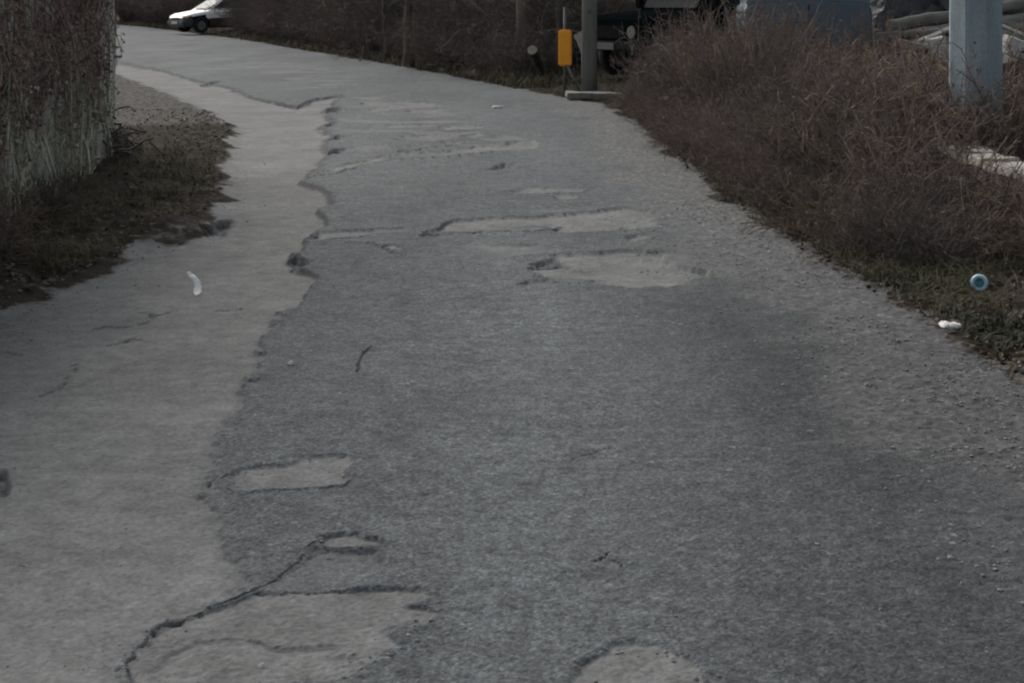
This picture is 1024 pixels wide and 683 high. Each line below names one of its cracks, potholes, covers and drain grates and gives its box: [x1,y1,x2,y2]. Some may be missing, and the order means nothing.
pothole [113,543,453,683]
pothole [411,205,677,238]
pothole [346,101,455,109]
pothole [510,248,716,289]
pothole [315,133,356,145]
pothole [305,152,398,178]
pothole [555,635,720,683]
crack [90,310,173,348]
pothole [381,132,498,142]
pothole [426,123,497,131]
